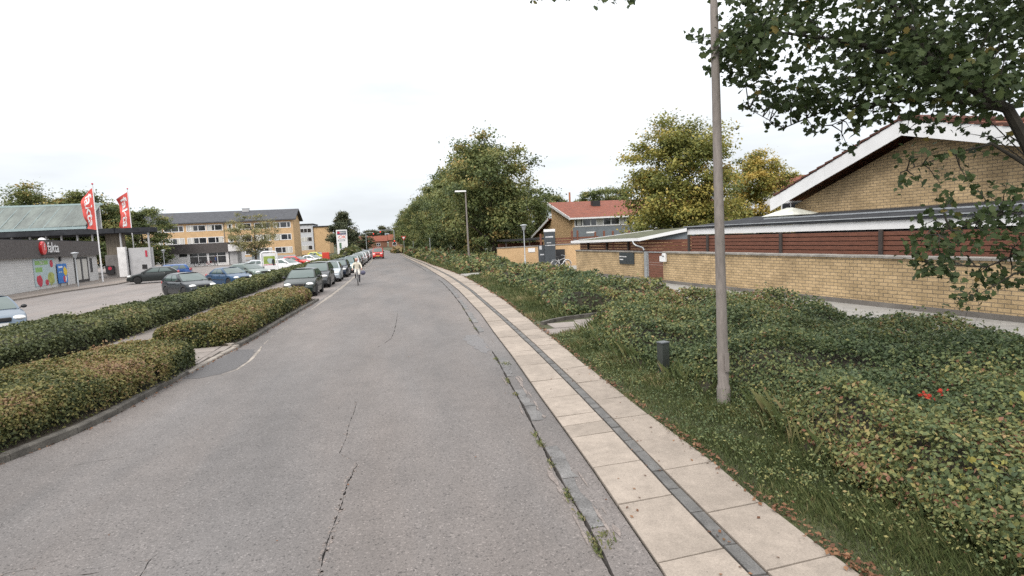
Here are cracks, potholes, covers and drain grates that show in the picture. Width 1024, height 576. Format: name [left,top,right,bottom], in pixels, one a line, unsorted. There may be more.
crack [317,402,359,576]
